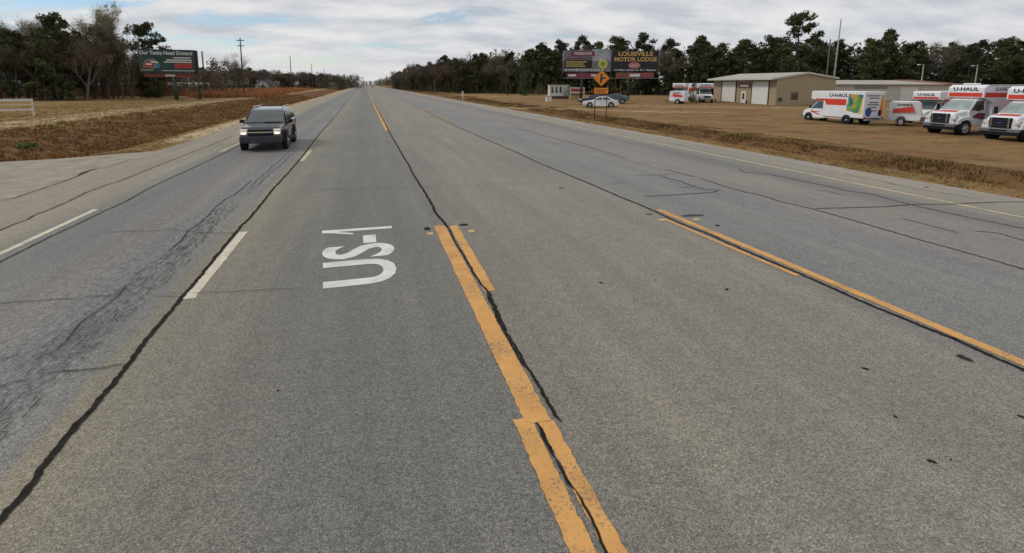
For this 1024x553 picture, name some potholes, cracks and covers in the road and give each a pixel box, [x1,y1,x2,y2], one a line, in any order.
crack [815,175,1023,233]
crack [0,149,292,441]
crack [656,174,719,196]
